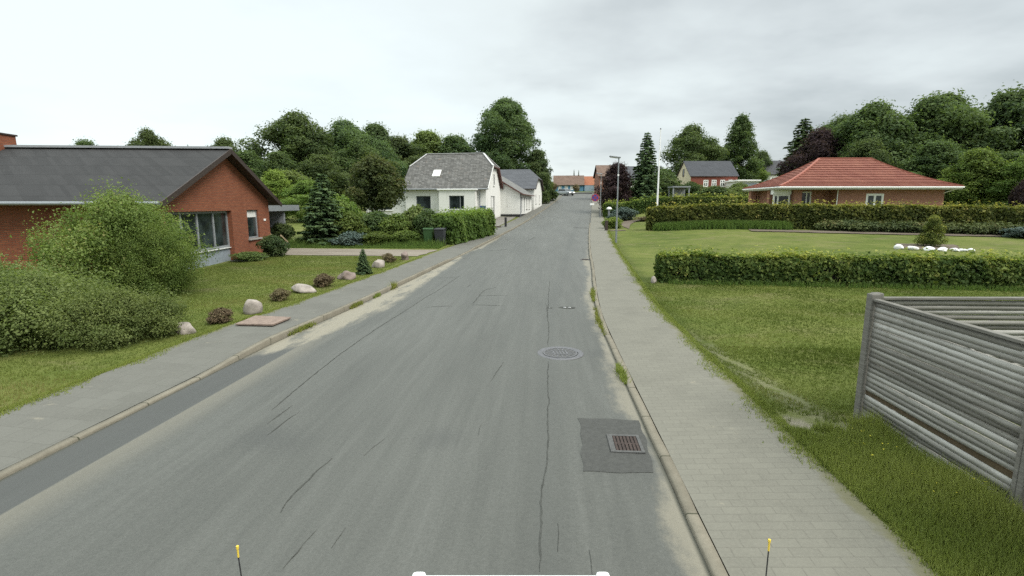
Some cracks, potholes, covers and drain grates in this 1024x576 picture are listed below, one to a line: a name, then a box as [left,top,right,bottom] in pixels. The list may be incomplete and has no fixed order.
drain grate [606,434,645,454]
crack [281,459,331,511]
manhole cover [537,346,584,360]
